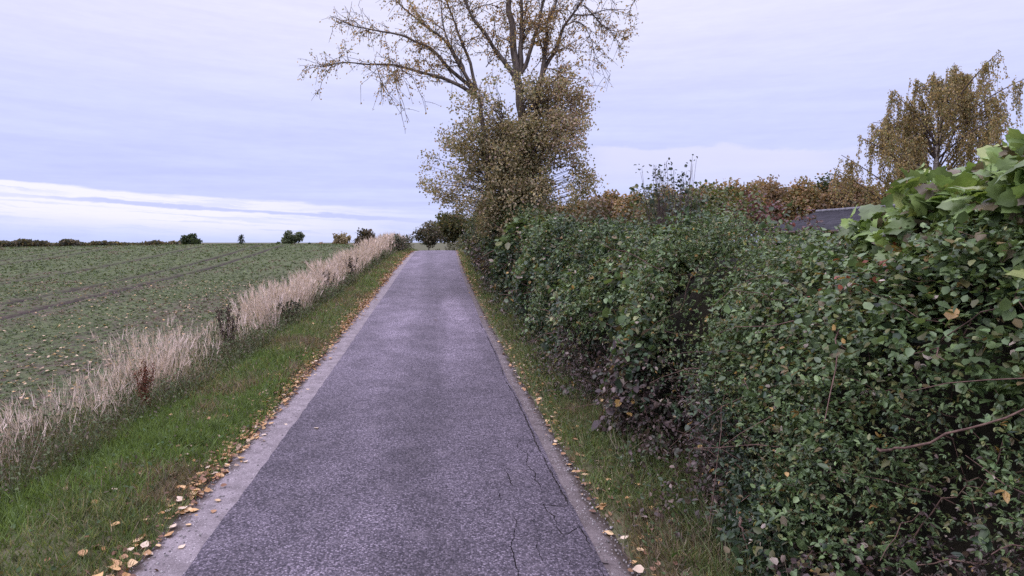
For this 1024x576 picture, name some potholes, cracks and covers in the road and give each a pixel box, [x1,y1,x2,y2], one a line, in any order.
crack [480,324,609,576]
